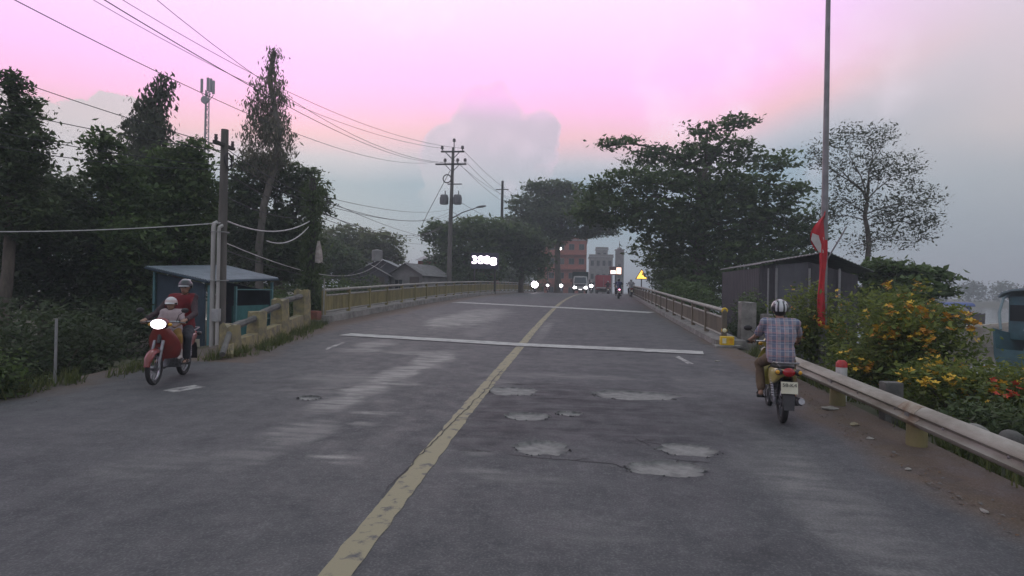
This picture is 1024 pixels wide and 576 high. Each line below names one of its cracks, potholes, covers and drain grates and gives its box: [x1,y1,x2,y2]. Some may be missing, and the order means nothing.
crack [382,369,681,495]
